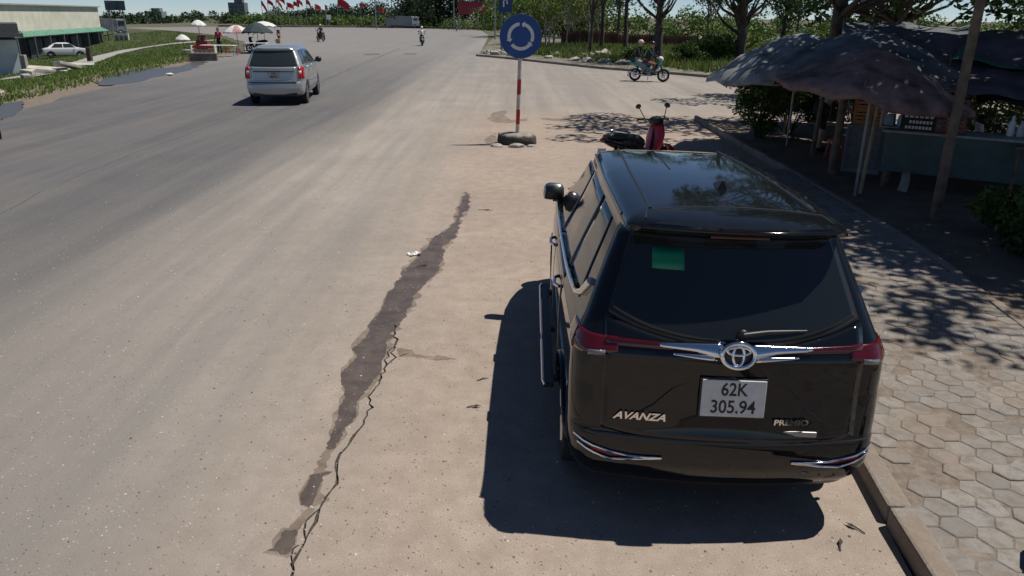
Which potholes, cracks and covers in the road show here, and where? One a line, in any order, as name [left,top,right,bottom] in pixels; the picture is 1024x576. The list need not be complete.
crack [290,325,408,576]
